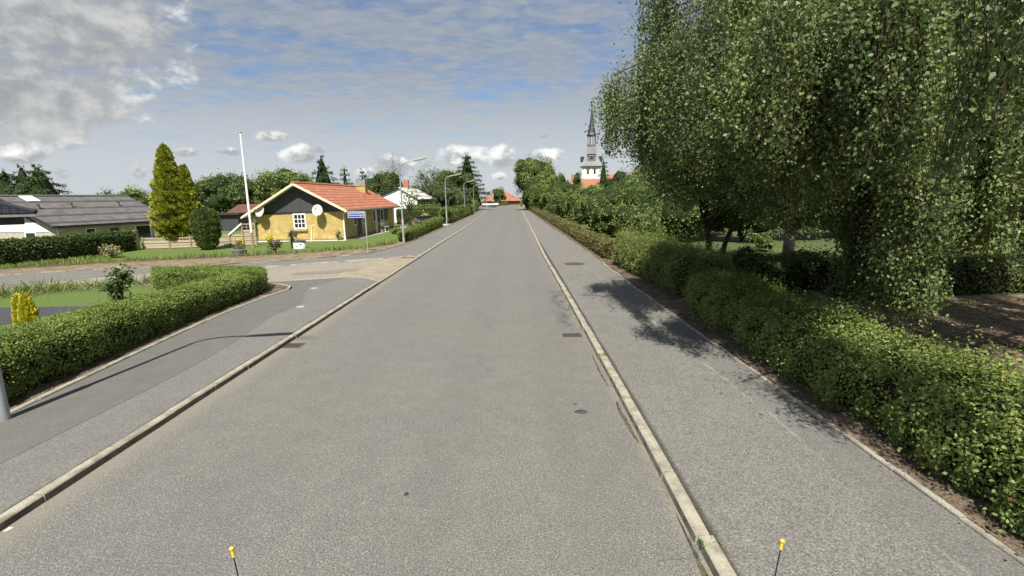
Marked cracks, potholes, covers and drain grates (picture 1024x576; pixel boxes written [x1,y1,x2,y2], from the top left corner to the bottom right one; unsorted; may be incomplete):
crack [583,355,608,385]
